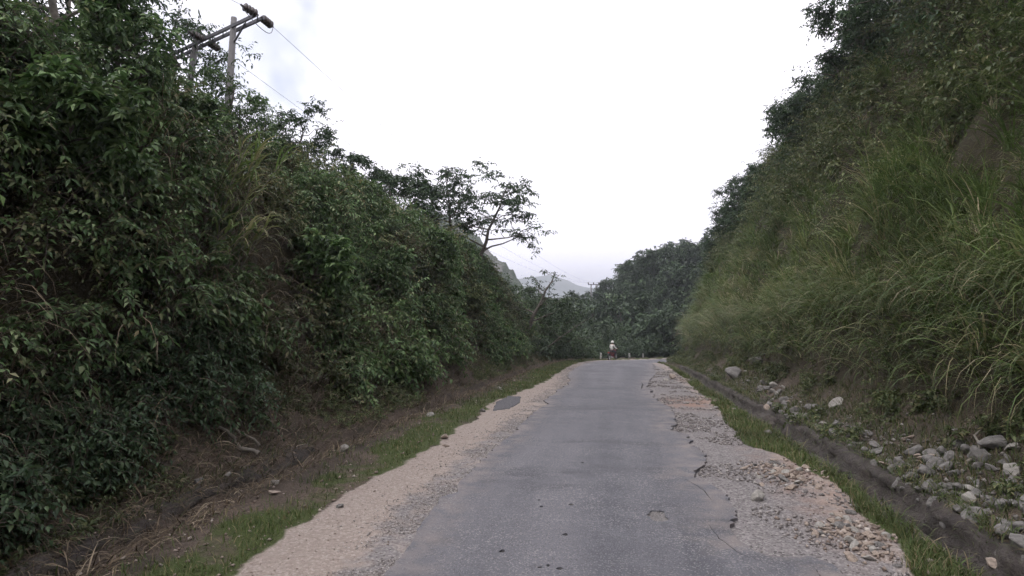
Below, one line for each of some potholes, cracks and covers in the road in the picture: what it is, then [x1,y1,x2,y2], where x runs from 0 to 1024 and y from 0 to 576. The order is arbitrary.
pothole [647,511,668,522]
